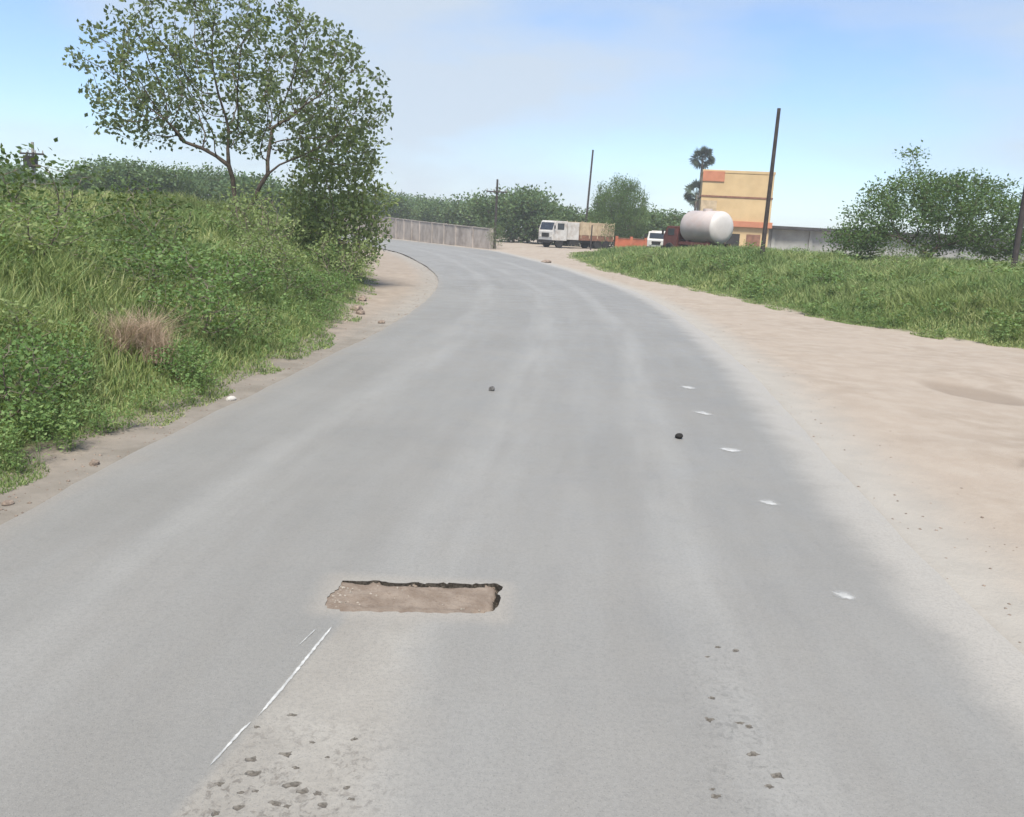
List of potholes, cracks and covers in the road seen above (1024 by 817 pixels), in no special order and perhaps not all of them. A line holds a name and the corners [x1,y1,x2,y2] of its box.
pothole [325,580,503,614]
